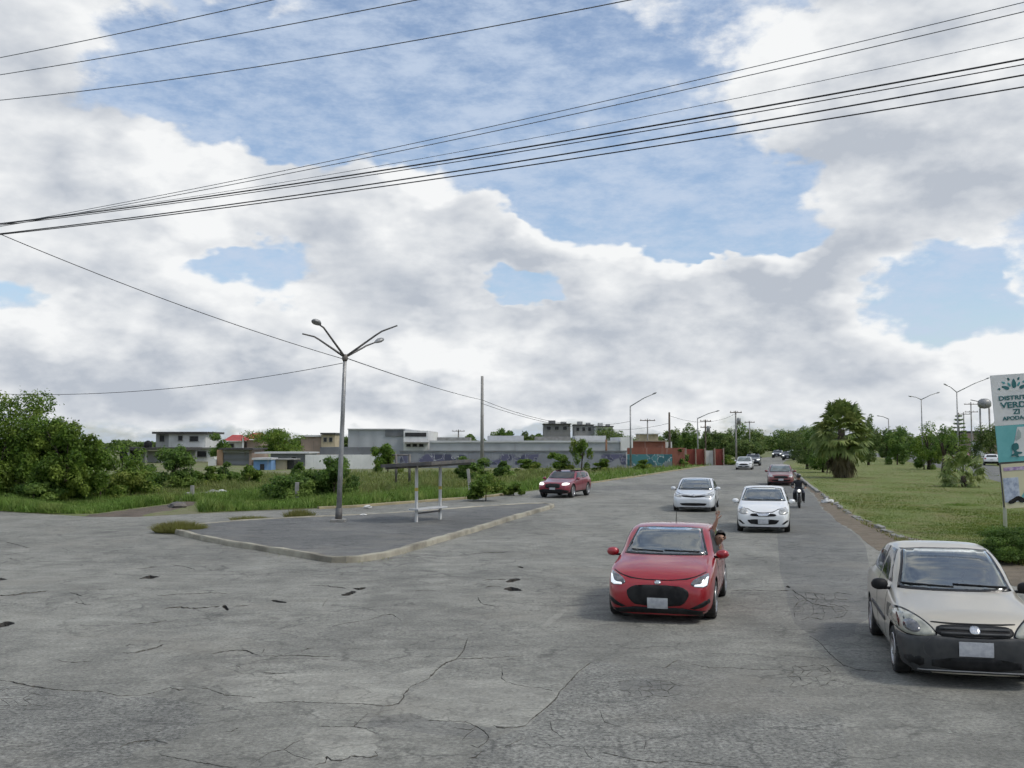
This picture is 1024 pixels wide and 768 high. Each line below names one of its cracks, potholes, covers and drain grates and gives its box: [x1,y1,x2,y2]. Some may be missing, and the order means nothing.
crack [731,590,851,620]
crack [0,639,742,768]
crack [617,636,882,697]
